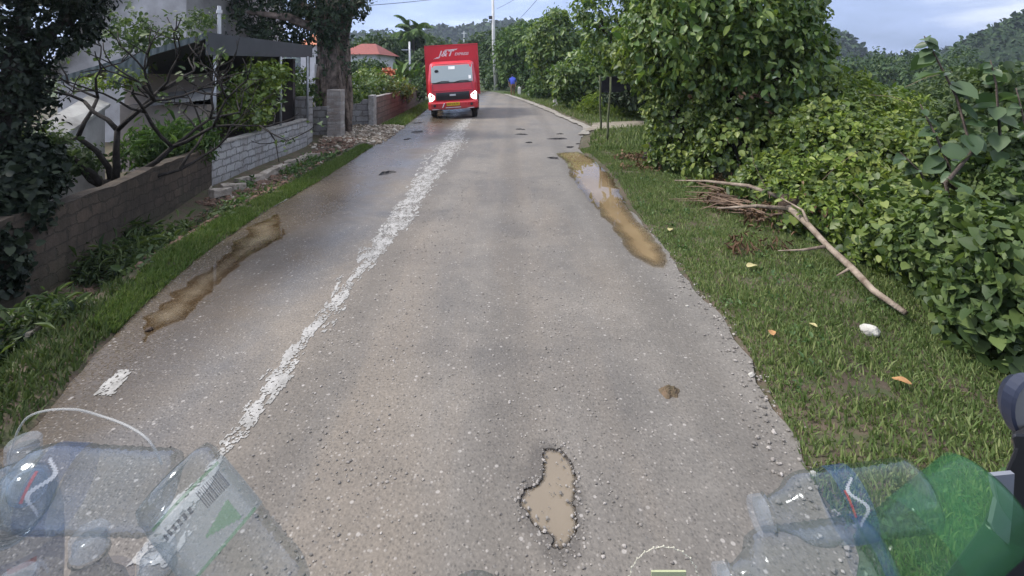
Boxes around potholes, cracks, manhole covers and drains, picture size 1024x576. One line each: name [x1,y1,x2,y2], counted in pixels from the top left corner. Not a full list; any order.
pothole [510,429,589,571]
